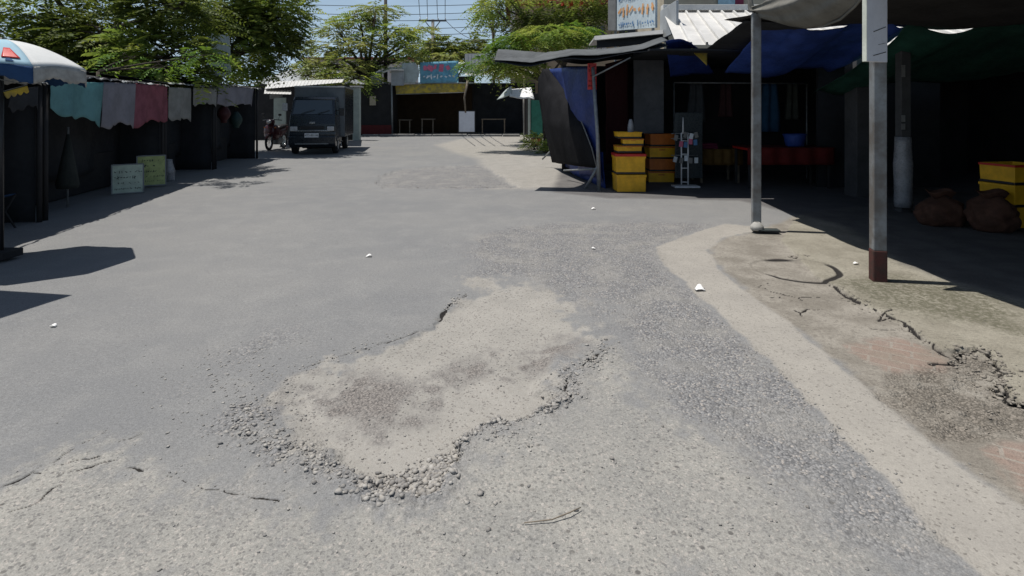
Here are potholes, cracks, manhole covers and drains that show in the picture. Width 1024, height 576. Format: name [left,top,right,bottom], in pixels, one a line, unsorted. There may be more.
crack [757,283,1024,409]
pothole [233,274,614,503]
crack [0,426,282,513]
